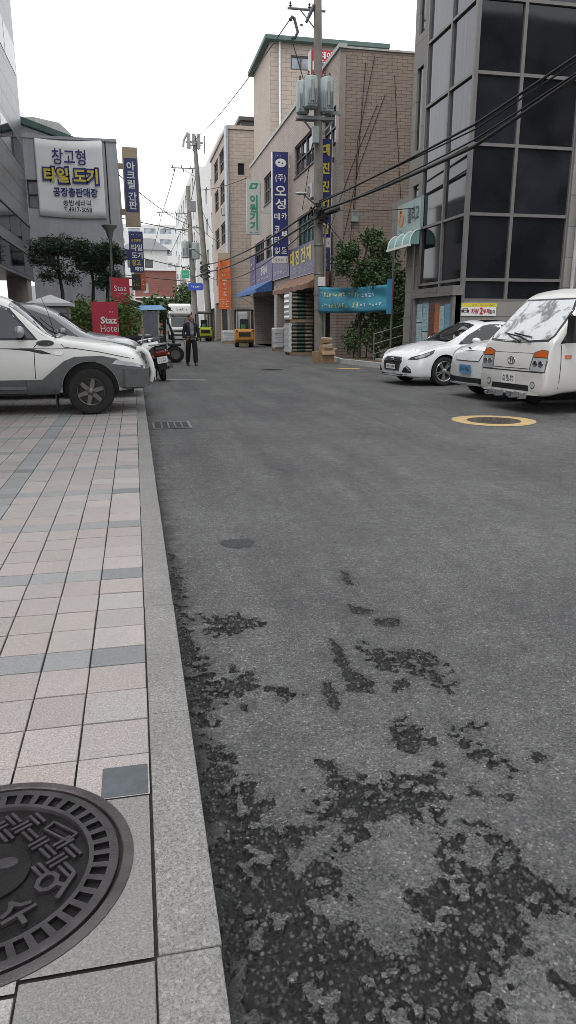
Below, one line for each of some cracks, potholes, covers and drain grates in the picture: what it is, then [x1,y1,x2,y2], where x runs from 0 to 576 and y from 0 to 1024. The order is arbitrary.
pothole [166,553,265,728]
pothole [196,733,576,1024]
drain grate [152,421,192,430]
pothole [354,641,461,694]
manhole cover [452,415,536,426]
manhole cover [0,782,134,987]
